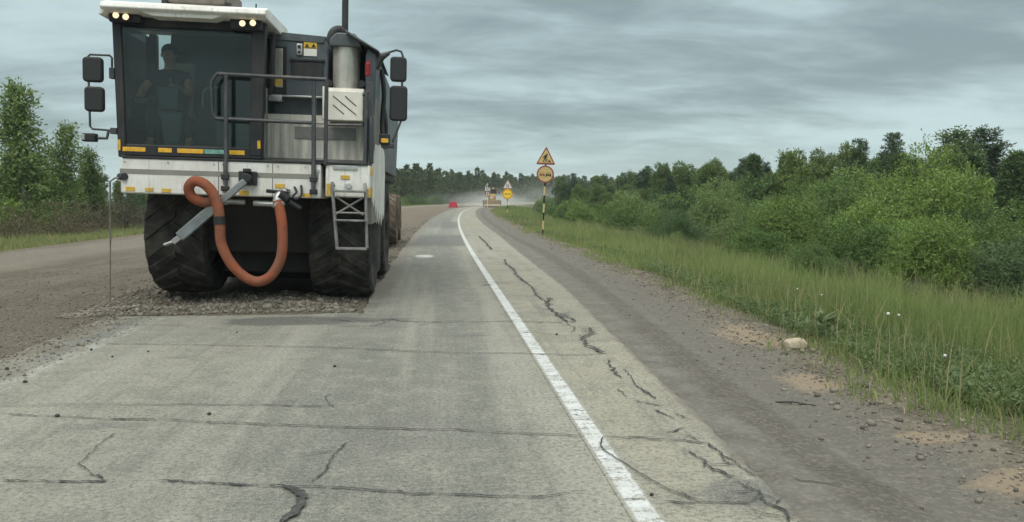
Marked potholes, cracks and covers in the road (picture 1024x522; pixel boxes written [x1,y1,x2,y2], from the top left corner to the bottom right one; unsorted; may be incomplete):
crack [111,236,834,522]
crack [4,391,584,522]
